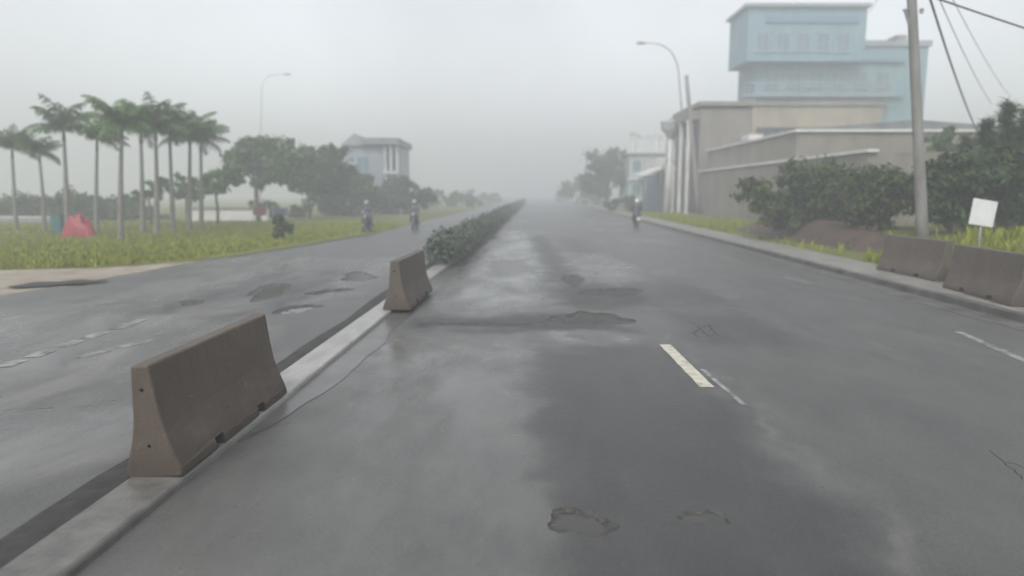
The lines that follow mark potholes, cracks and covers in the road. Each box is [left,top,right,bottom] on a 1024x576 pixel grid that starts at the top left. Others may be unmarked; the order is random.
pothole [272,304,324,314]
pothole [340,271,379,282]
pothole [246,283,291,302]
pothole [546,311,637,325]
pothole [547,507,620,538]
pothole [561,275,586,288]
pothole [578,288,644,297]
pothole [677,509,730,525]
